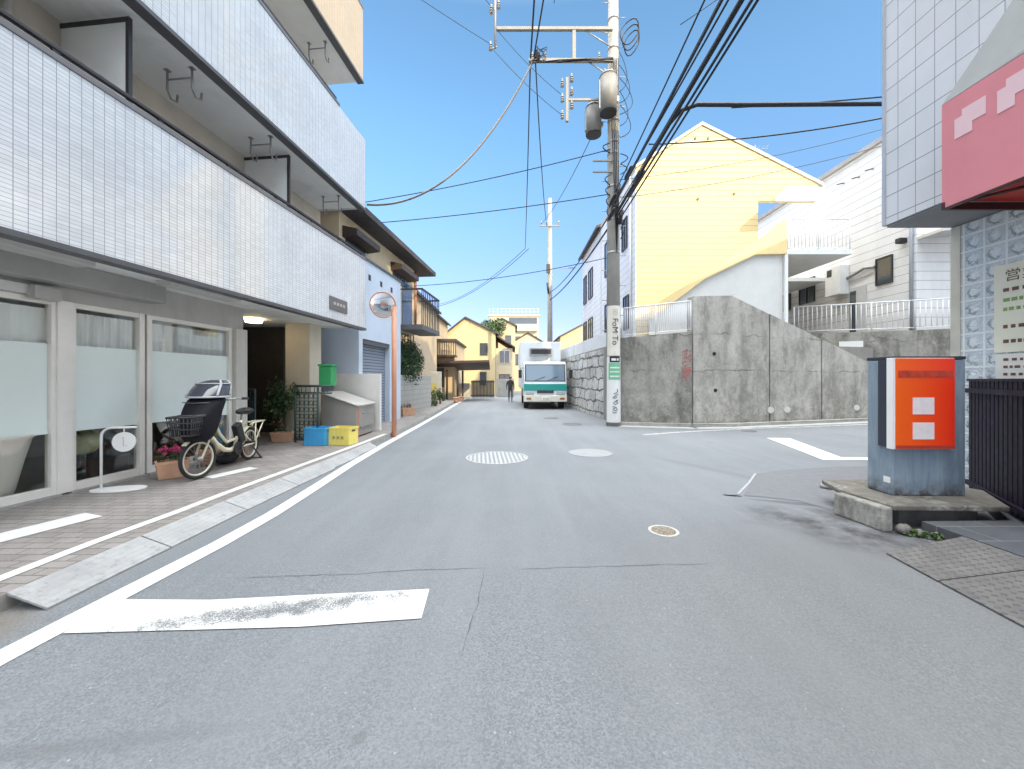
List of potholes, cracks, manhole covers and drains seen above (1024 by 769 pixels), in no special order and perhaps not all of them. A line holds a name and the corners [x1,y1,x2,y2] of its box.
crack [245,568,484,656]
manhole cover [648,525,679,537]
manhole cover [466,451,528,464]
manhole cover [568,448,613,457]
